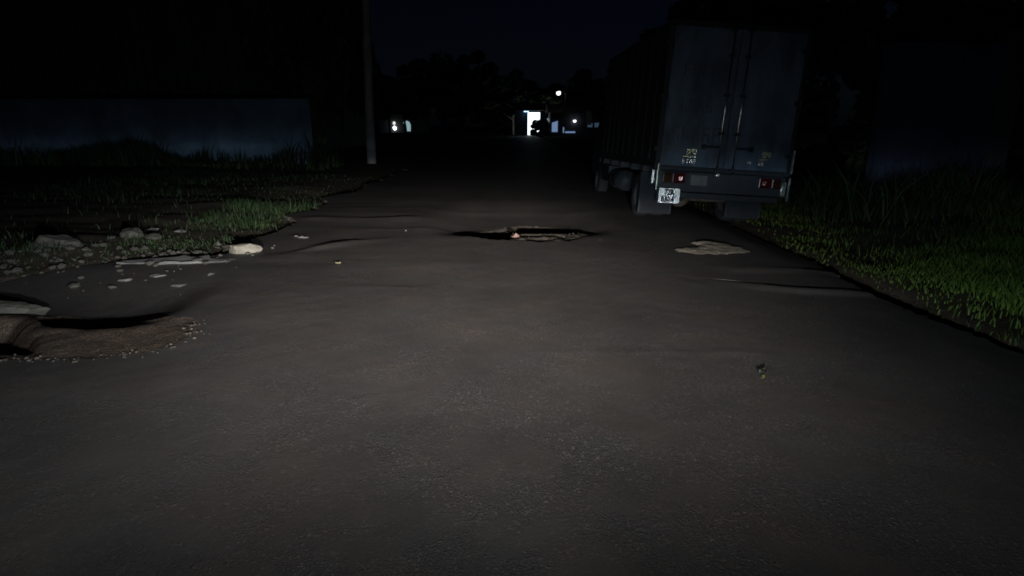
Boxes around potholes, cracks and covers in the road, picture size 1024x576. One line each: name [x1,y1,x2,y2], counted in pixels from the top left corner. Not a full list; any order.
crack [698,276,857,291]
pothole [462,226,591,242]
pothole [0,315,210,363]
